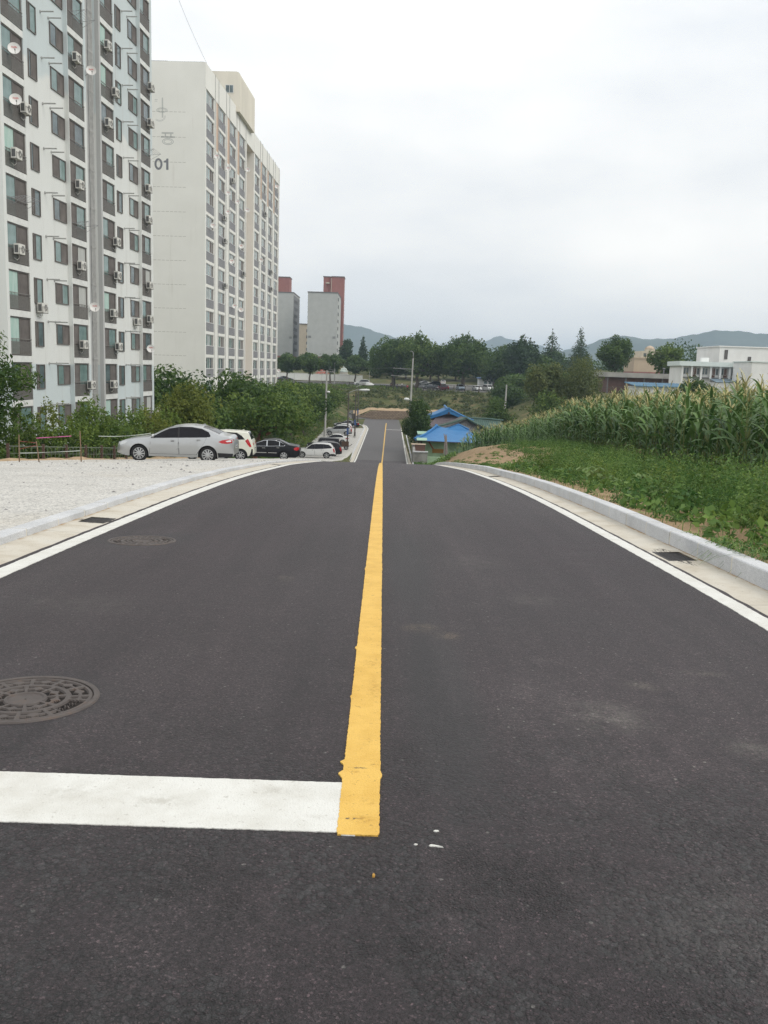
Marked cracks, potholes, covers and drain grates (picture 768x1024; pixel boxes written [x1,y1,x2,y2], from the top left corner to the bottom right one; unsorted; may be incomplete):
manhole cover [107,535,176,546]
drain grate [653,552,695,561]
manhole cover [0,676,100,725]
